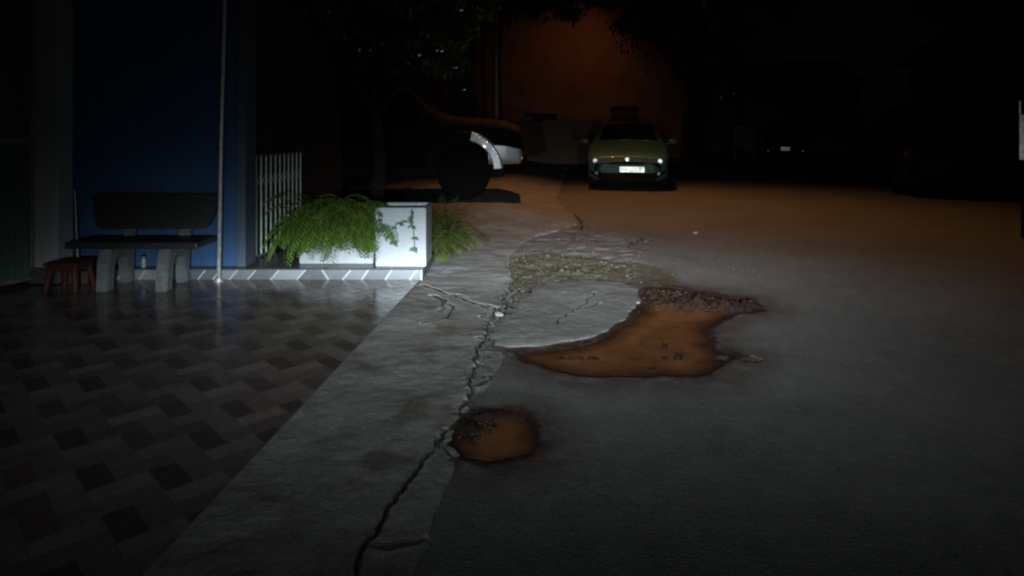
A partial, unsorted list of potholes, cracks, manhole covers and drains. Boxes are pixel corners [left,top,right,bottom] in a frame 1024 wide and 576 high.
crack [345,214,626,576]
pothole [501,283,773,381]
pothole [439,404,552,472]
